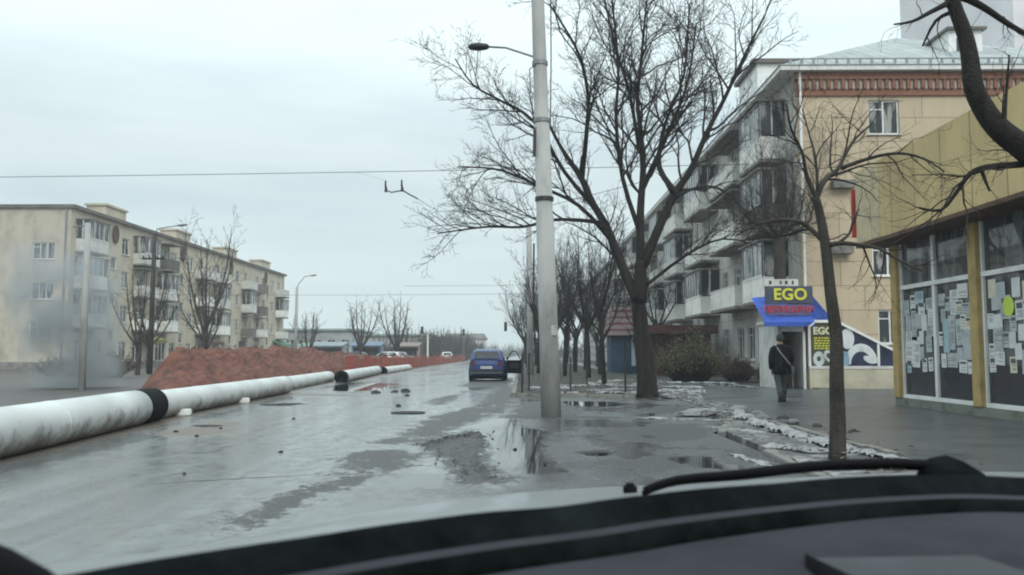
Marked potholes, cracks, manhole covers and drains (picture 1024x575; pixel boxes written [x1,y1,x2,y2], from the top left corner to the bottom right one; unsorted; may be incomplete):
pothole [420,432,498,482]
